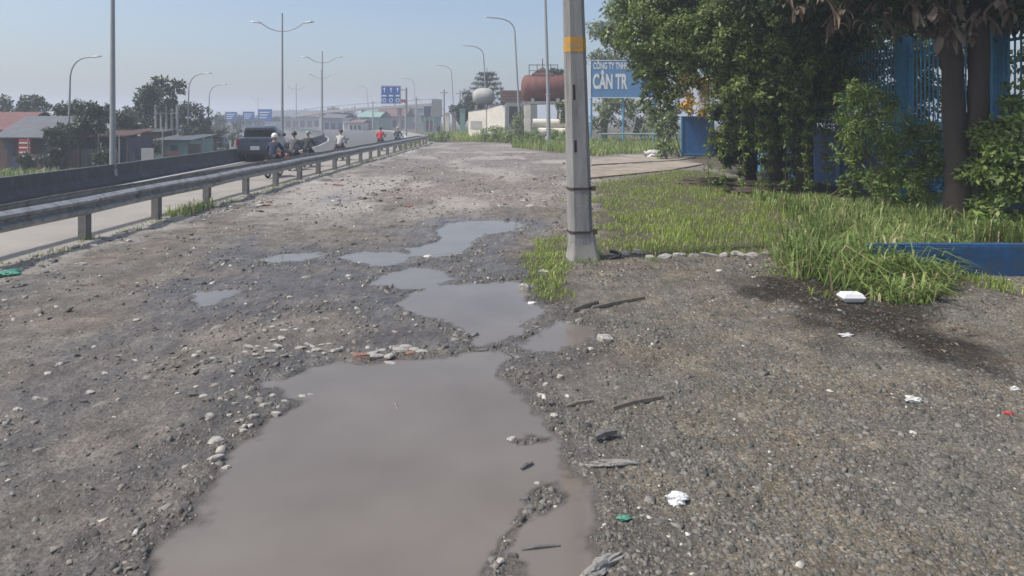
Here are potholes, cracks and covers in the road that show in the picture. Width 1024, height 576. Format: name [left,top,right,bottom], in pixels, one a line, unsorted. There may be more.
pothole [332,248,424,268]
pothole [383,277,558,352]
pothole [502,317,608,360]
pothole [127,346,618,576]
pothole [247,250,340,265]
pothole [401,219,529,259]
pothole [357,263,469,294]
pothole [175,285,249,310]
